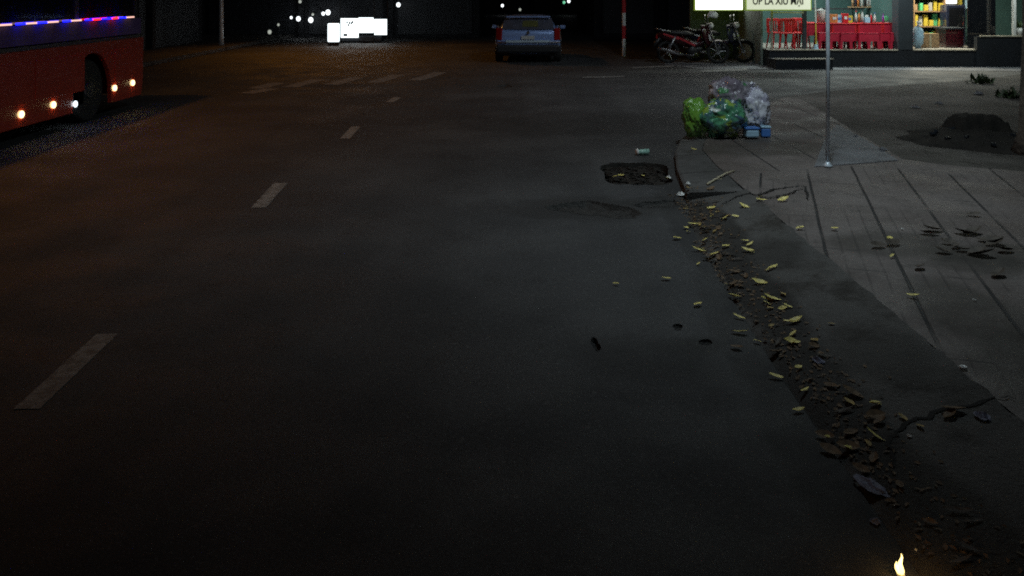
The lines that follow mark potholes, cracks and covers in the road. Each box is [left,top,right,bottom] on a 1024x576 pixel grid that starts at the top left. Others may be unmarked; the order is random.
crack [722,186,809,204]
crack [885,396,1015,467]
pothole [544,200,642,219]
